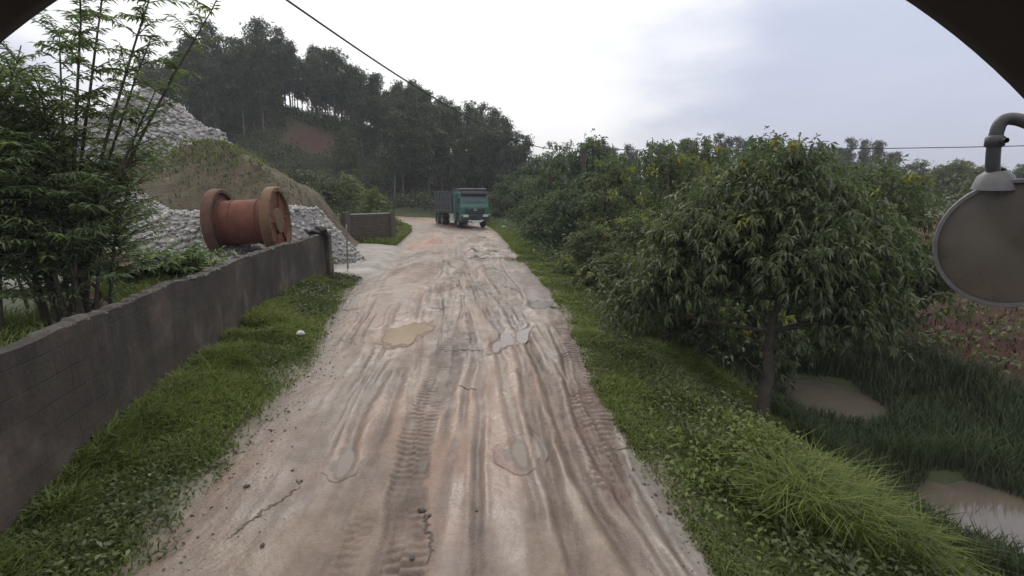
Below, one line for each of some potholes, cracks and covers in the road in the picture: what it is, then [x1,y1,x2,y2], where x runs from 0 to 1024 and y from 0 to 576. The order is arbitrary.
pothole [509,324,534,347]
crack [228,480,301,538]
pothole [525,299,553,309]
pothole [486,325,518,355]
pothole [321,444,364,482]
pothole [494,435,548,475]
pothole [372,317,434,349]
